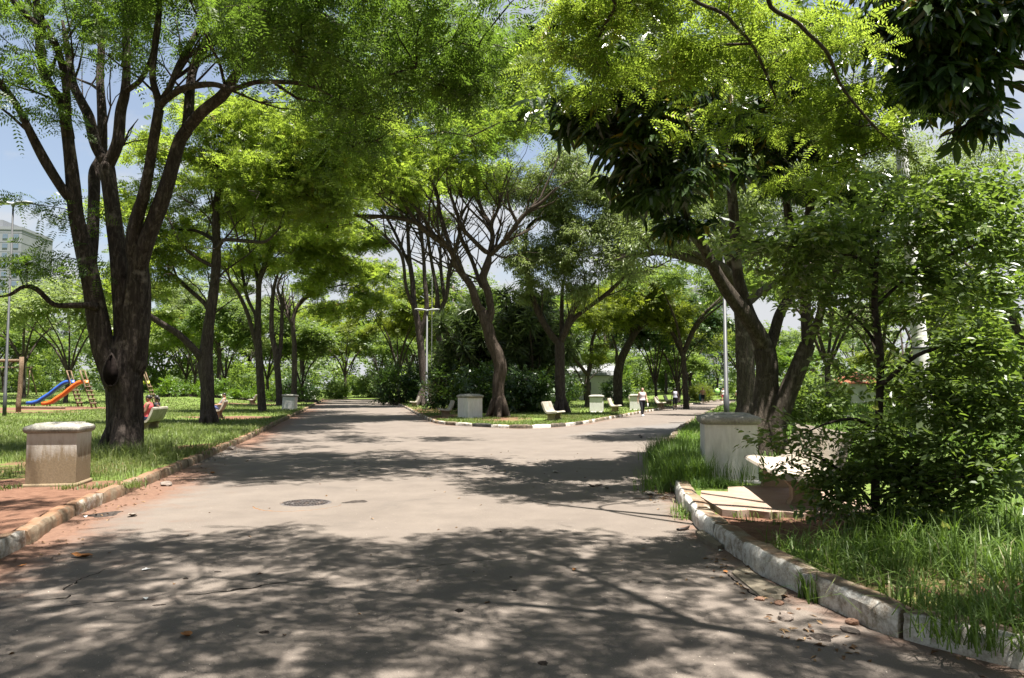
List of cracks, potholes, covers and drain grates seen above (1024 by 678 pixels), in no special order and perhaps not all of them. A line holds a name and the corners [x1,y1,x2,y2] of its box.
crack [186,578,324,595]
manhole cover [280,499,331,507]
